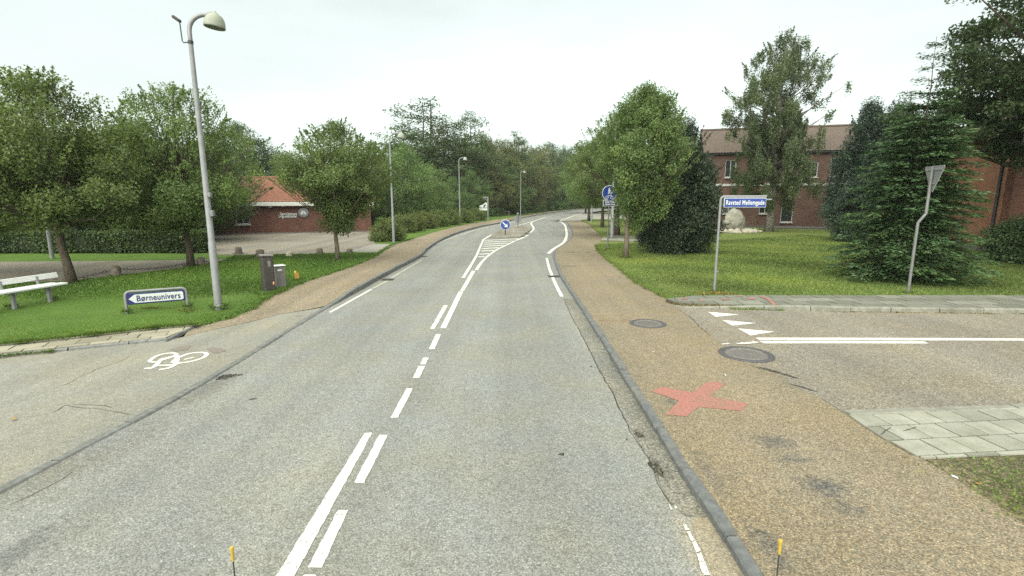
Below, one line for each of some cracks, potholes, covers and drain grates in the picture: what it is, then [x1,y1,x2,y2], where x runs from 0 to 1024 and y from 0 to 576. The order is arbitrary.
crack [12,472,72,504]
crack [23,404,132,418]
manhole cover [629,319,667,328]
manhole cover [718,346,775,363]
